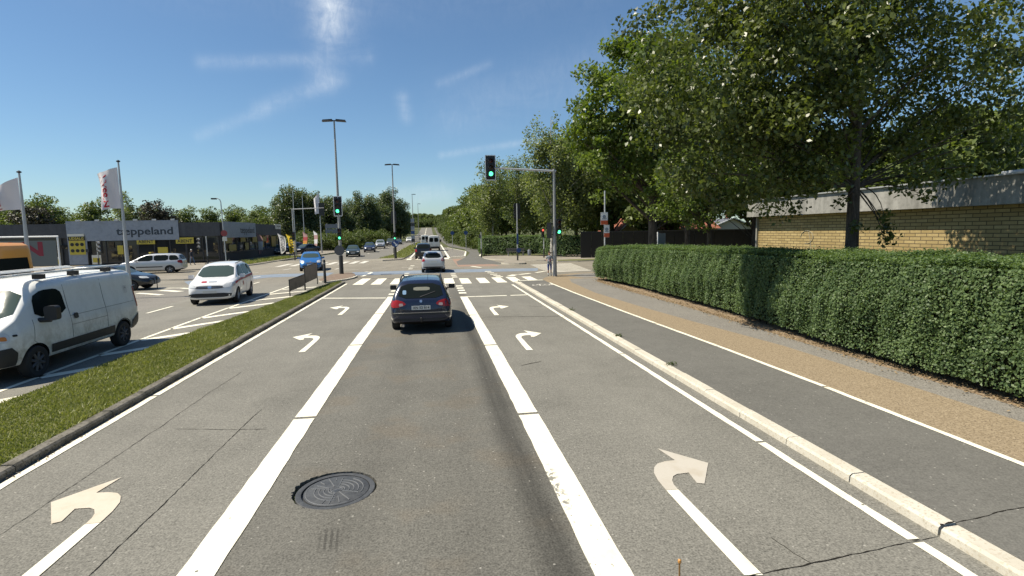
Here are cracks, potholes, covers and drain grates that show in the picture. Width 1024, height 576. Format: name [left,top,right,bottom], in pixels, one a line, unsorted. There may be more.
crack [746,507,1024,576]
manhole cover [295,473,376,510]
